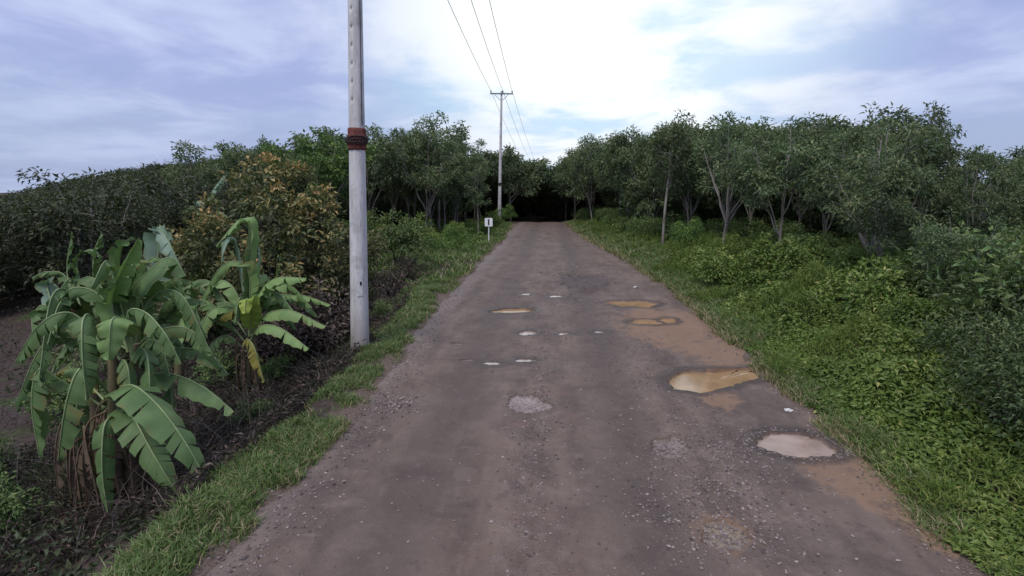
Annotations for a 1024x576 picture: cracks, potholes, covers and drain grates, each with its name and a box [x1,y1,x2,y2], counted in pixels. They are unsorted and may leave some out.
pothole [755,431,839,458]
pothole [666,367,758,393]
pothole [506,394,553,413]
pothole [602,300,660,308]
